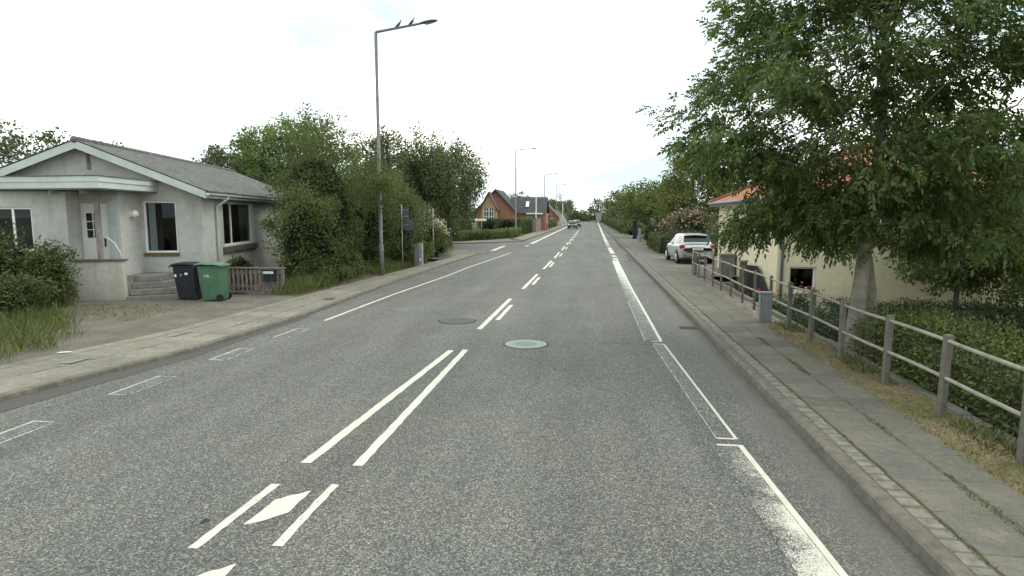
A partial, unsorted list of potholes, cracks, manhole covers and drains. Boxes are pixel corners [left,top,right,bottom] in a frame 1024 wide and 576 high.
manhole cover [503,339,549,349]
